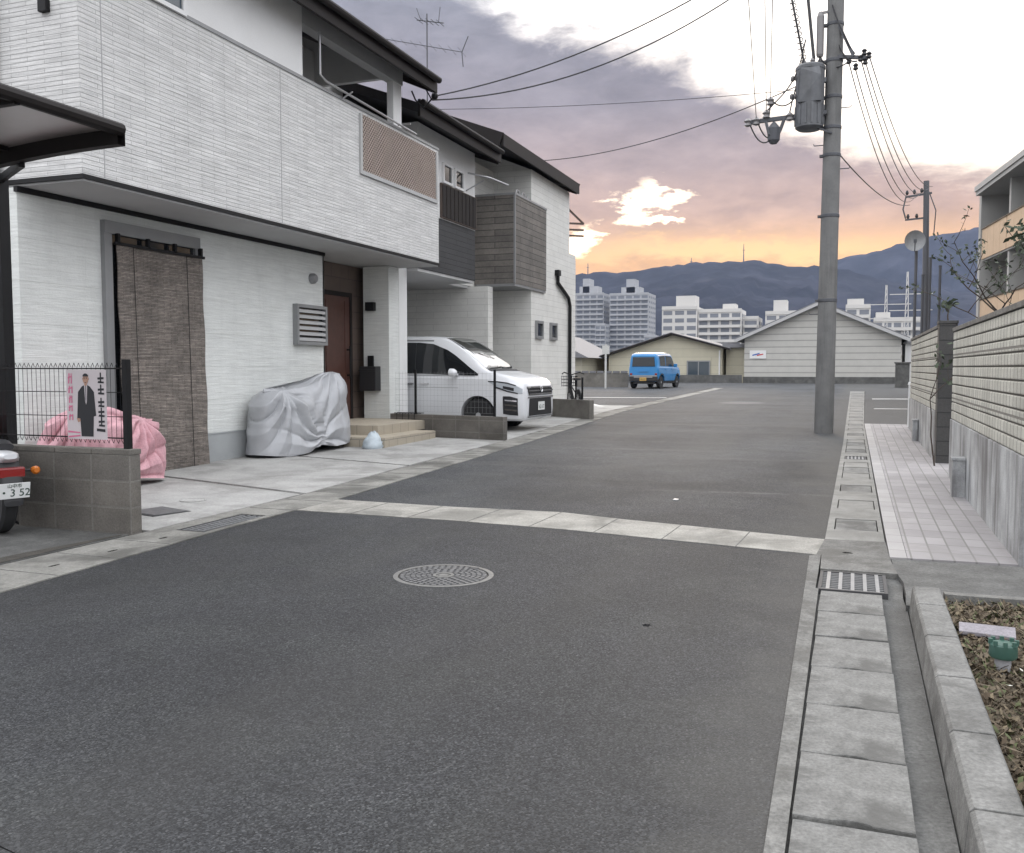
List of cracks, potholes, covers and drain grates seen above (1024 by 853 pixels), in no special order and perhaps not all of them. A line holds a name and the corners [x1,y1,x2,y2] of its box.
drain grate [818,570,888,600]
manhole cover [393,564,494,587]
drain grate [177,514,262,532]
